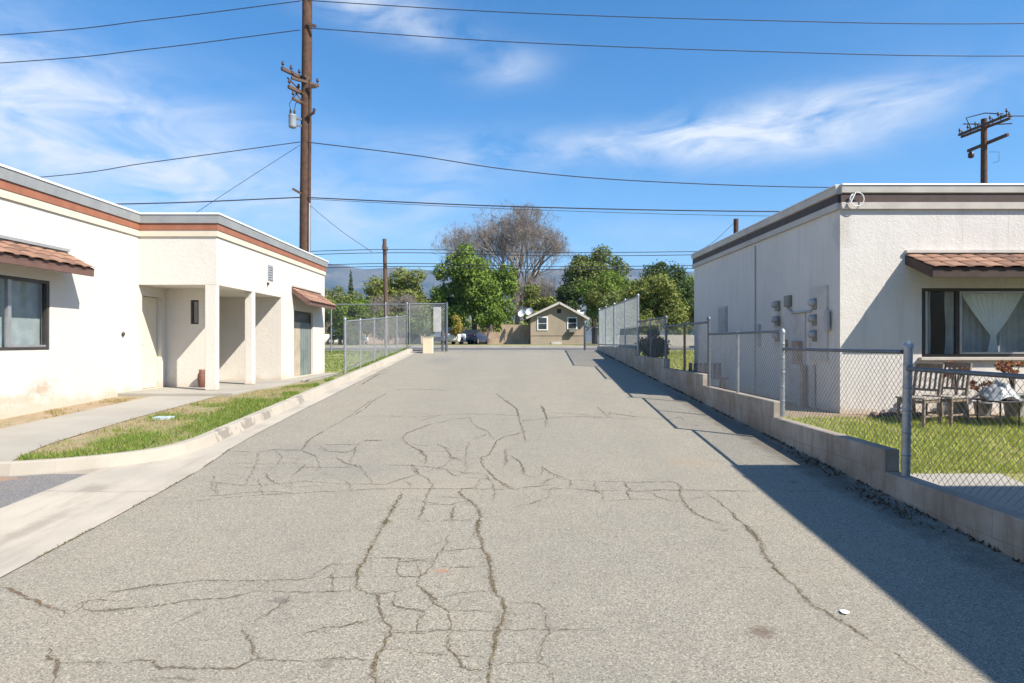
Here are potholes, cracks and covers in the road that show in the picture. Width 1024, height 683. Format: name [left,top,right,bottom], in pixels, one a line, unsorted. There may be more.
crack [3,566,381,680]
crack [211,372,737,683]
crack [707,494,927,674]
